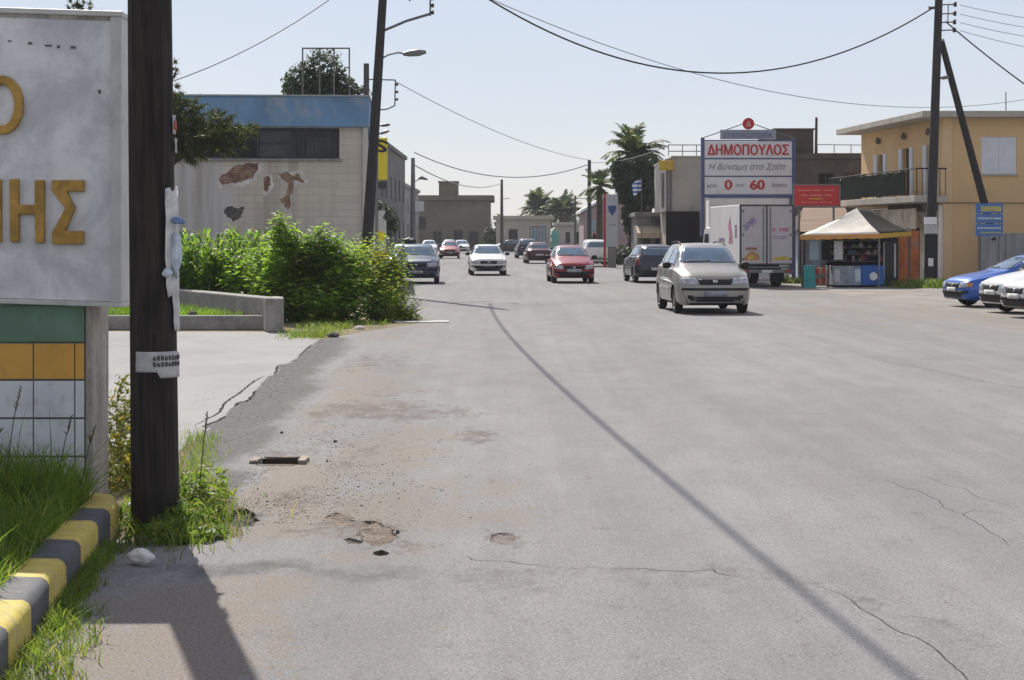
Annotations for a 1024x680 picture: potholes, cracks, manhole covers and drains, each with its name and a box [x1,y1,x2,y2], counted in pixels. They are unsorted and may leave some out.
pothole [356,521,398,546]
crack [196,345,311,427]
pothole [490,533,517,544]
crack [817,585,968,680]
drain grate [249,455,310,465]
pothole [324,513,357,527]
